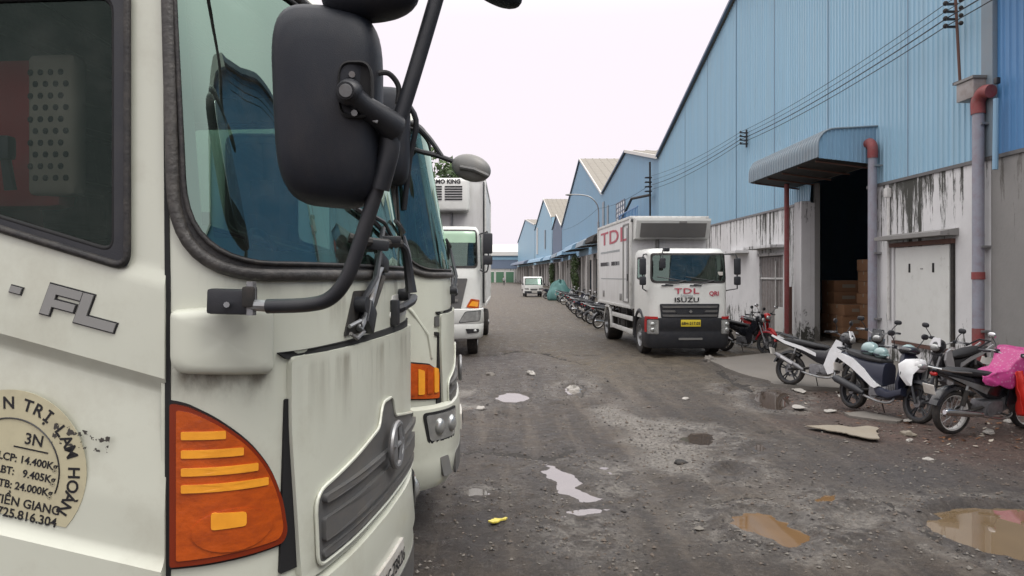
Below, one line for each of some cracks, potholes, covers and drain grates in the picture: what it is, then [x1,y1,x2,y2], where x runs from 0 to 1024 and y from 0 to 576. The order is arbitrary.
pothole [487,391,537,403]
pothole [530,462,612,506]
pothole [455,484,502,499]
pothole [905,497,1024,568]
pothole [708,503,827,551]
pothole [746,388,800,411]
pothole [670,426,727,447]
pothole [556,502,629,521]
